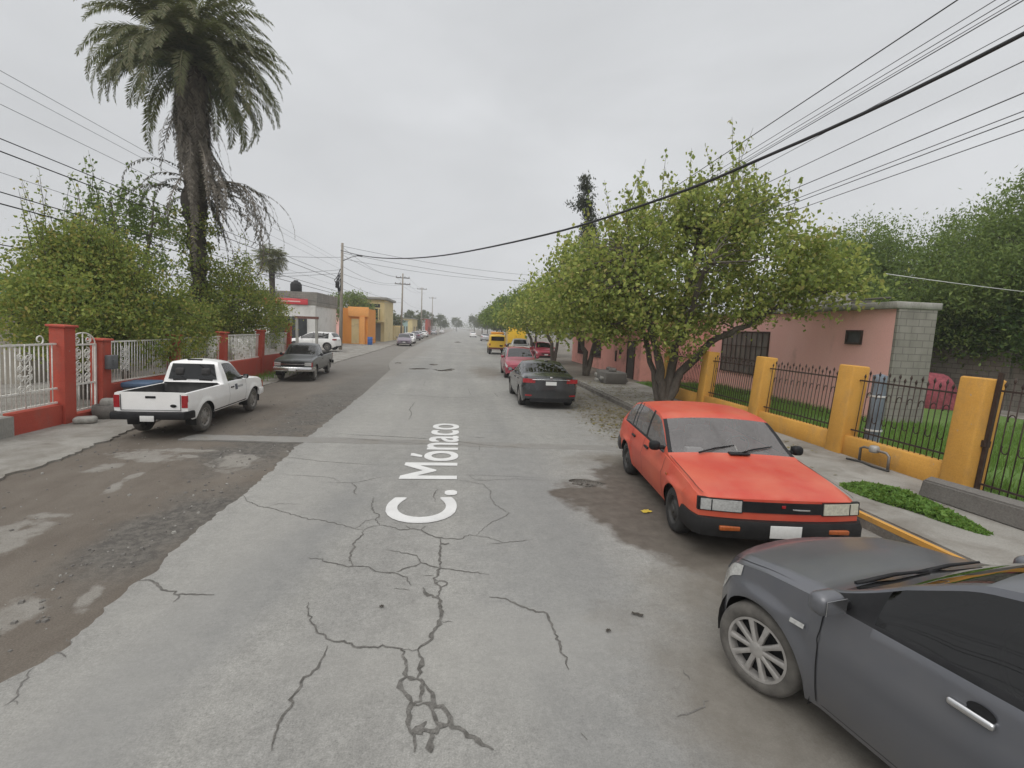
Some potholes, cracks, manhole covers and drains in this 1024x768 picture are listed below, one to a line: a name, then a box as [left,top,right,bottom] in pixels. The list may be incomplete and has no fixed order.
crack [7,668,33,705]
crack [239,453,569,752]
crack [136,579,214,600]
